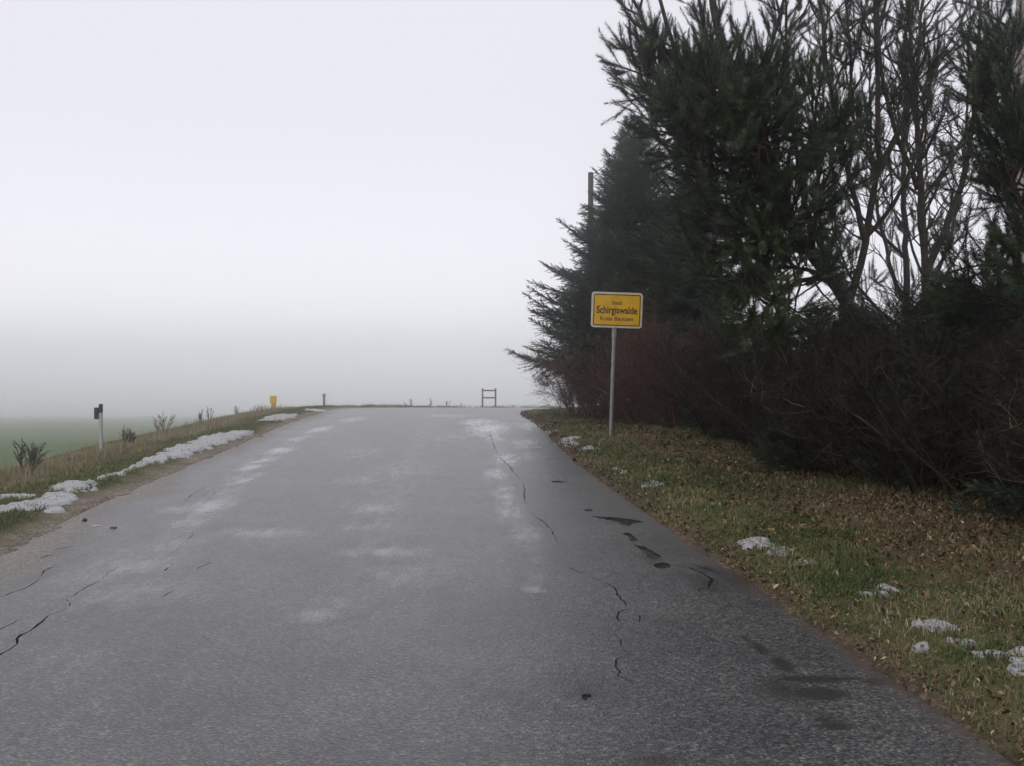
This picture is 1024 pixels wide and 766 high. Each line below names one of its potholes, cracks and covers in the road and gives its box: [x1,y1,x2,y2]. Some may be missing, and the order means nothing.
pothole [592,516,641,526]
crack [0,565,120,655]
crack [570,568,641,684]
pothole [632,544,662,560]
crack [677,562,719,592]
